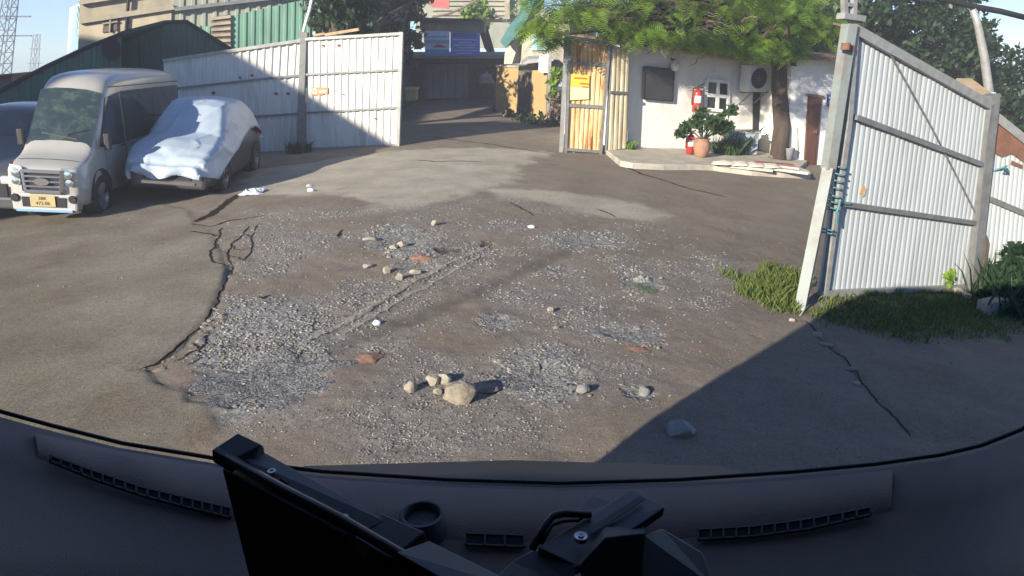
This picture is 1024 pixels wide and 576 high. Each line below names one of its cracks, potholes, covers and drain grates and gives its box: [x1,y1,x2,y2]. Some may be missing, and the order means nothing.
pothole [486,354,584,395]
pothole [544,265,581,276]
pothole [592,321,665,345]
pothole [389,259,441,272]
crack [805,320,910,435]
pothole [551,232,618,249]
pothole [432,246,460,254]
pothole [616,384,658,401]
crack [136,193,266,370]
pothole [362,231,439,255]
crack [629,168,724,197]
